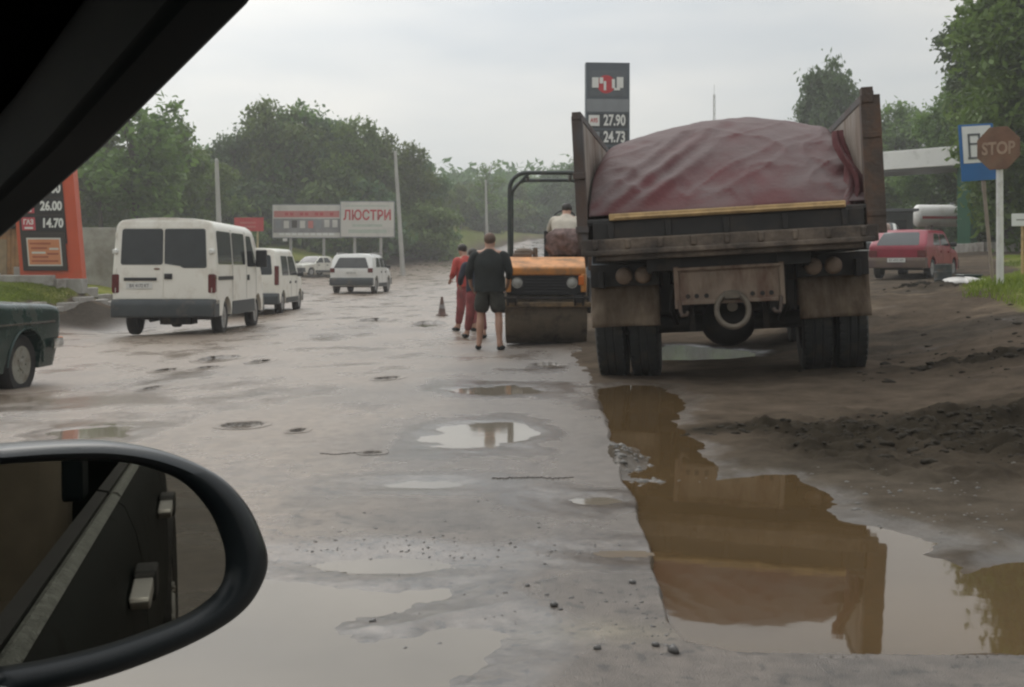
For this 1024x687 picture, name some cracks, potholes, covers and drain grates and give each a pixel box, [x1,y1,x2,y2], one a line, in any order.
pothole [283,426,313,434]
pothole [212,420,273,430]
pothole [189,353,249,363]
